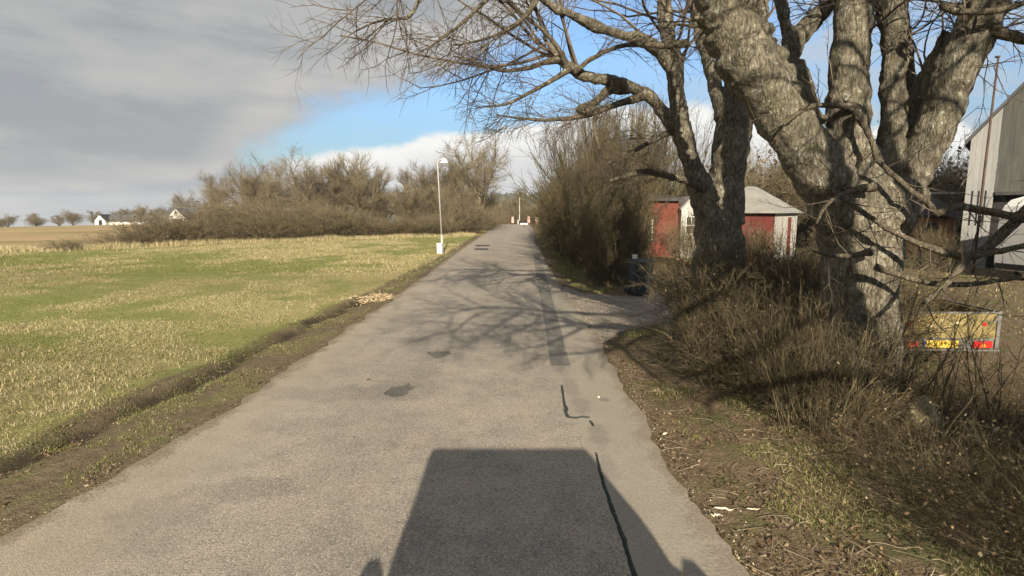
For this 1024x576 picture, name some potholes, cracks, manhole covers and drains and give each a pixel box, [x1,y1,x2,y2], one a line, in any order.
pothole [428,350,451,359]
pothole [383,383,415,397]
